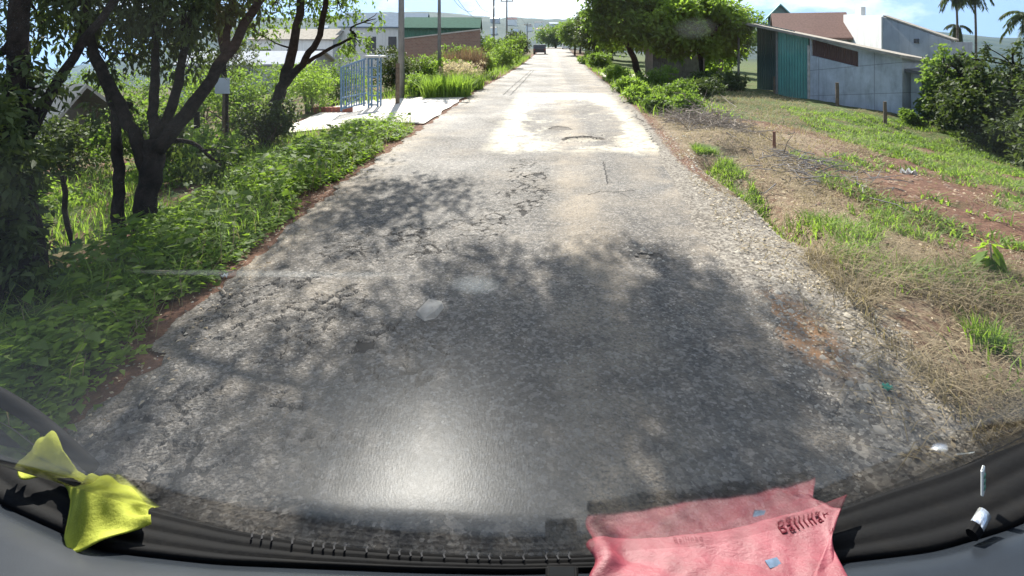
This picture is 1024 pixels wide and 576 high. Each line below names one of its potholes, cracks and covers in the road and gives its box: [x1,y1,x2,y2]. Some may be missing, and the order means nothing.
pothole [552,135,616,143]
crack [588,161,635,198]
